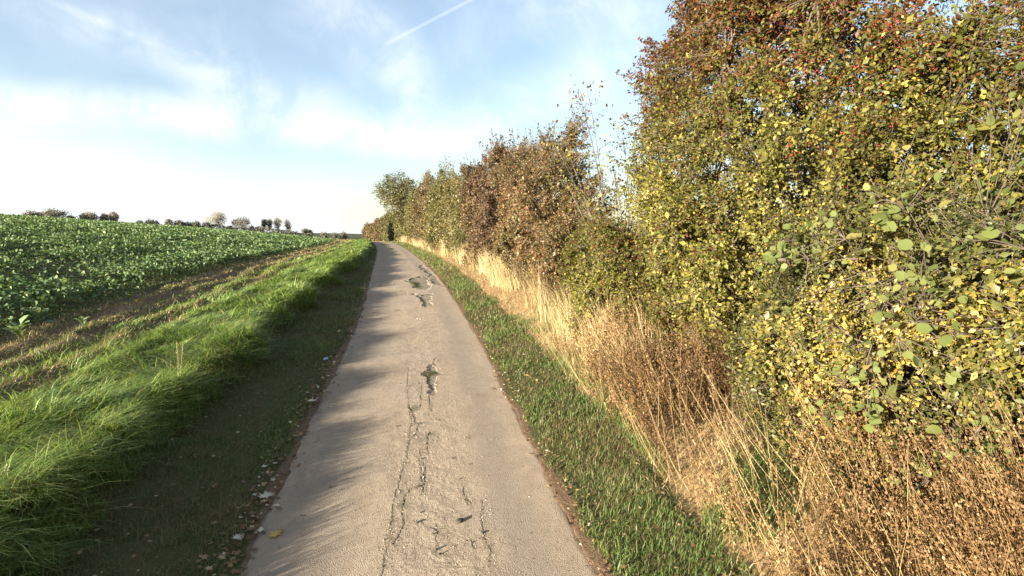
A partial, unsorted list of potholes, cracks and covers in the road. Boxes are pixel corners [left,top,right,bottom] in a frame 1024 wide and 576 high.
pothole [419,265,445,287]
pothole [421,364,442,395]
pothole [412,293,434,307]
crack [461,483,493,562]
crack [381,354,443,576]
pothole [404,276,432,290]
